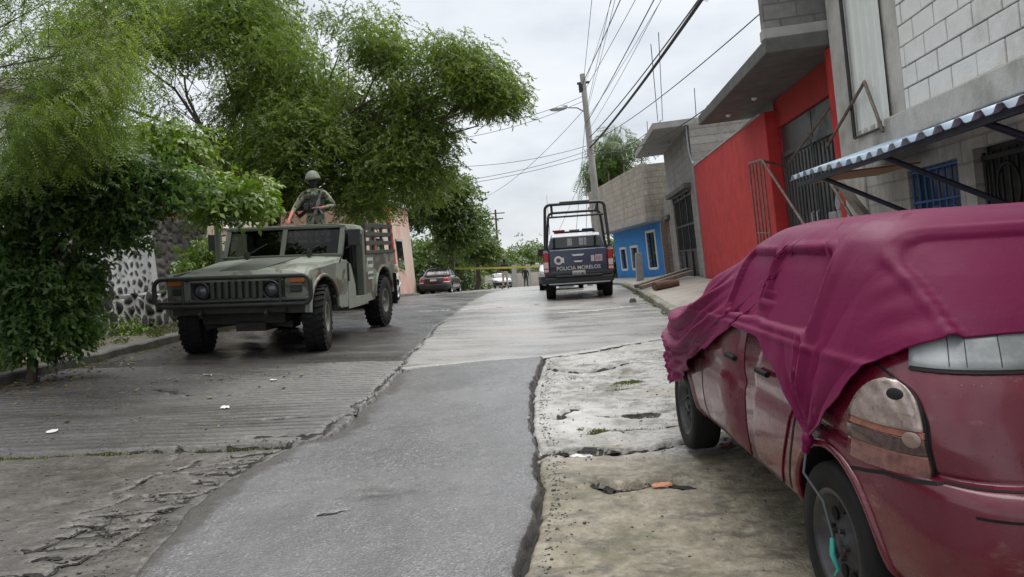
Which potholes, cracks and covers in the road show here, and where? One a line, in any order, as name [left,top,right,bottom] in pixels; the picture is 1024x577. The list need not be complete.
crack [544,409,685,458]
crack [0,305,527,577]
